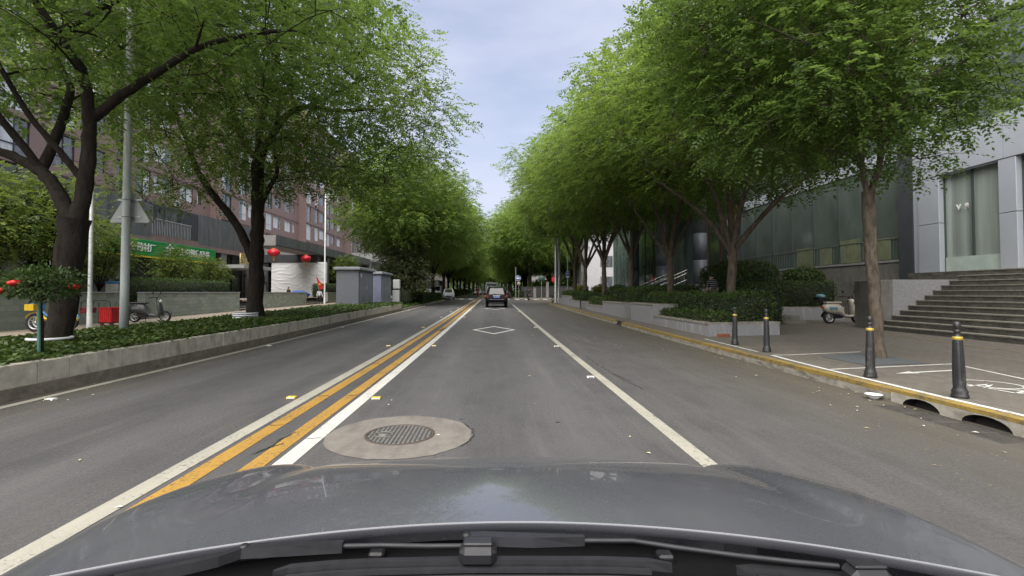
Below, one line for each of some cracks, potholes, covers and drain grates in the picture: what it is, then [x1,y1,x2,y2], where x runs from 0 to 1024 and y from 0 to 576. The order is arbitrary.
manhole cover [323,416,471,460]
drain grate [873,388,1024,444]
crack [253,424,311,454]
